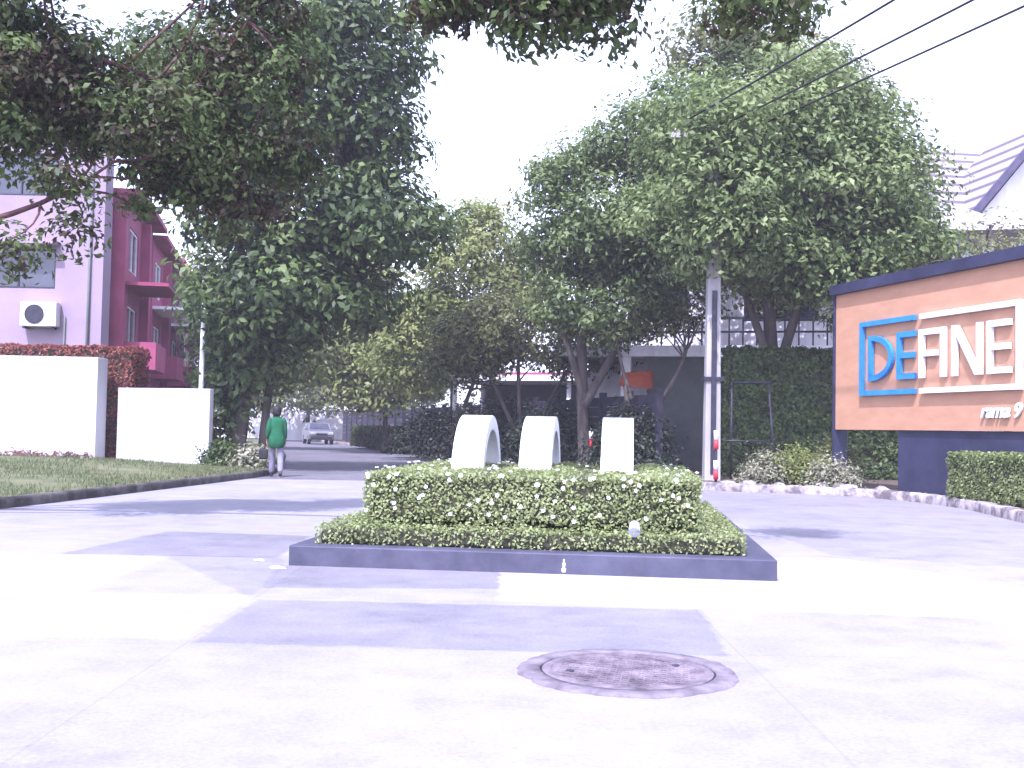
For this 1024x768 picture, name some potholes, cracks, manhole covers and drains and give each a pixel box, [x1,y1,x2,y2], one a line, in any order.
manhole cover [517,649,739,699]
